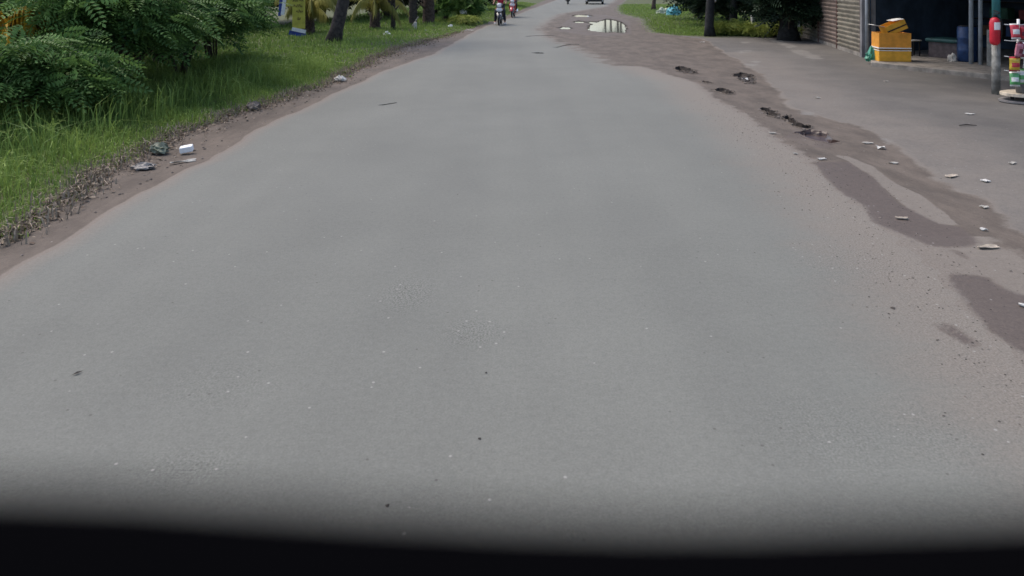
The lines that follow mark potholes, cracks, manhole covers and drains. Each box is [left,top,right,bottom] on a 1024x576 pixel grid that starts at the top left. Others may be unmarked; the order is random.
pothole [791,130,841,144]
pothole [777,114,813,130]
pothole [758,107,783,118]
pothole [730,72,757,84]
pothole [673,66,699,74]
